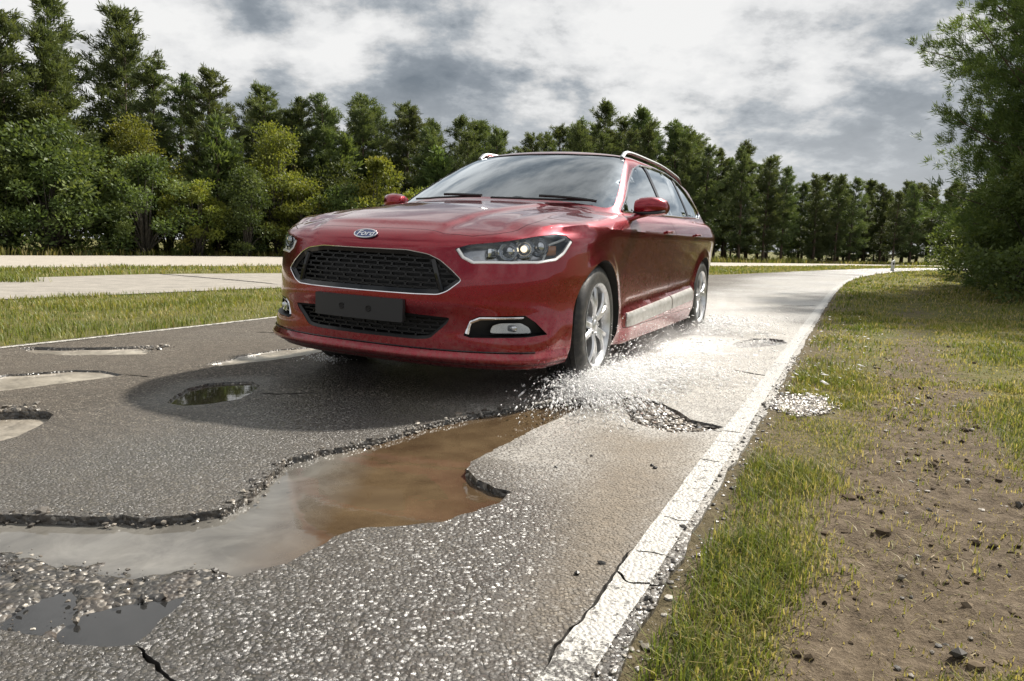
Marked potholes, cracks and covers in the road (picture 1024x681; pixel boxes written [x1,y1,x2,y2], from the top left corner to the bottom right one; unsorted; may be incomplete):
pothole [208,347,321,366]
pothole [0,400,588,647]
pothole [167,381,260,406]
crack [544,549,673,670]
pothole [731,338,787,348]
pothole [20,346,152,355]
pothole [606,395,723,432]
pothole [0,370,123,391]
crack [134,646,176,681]
